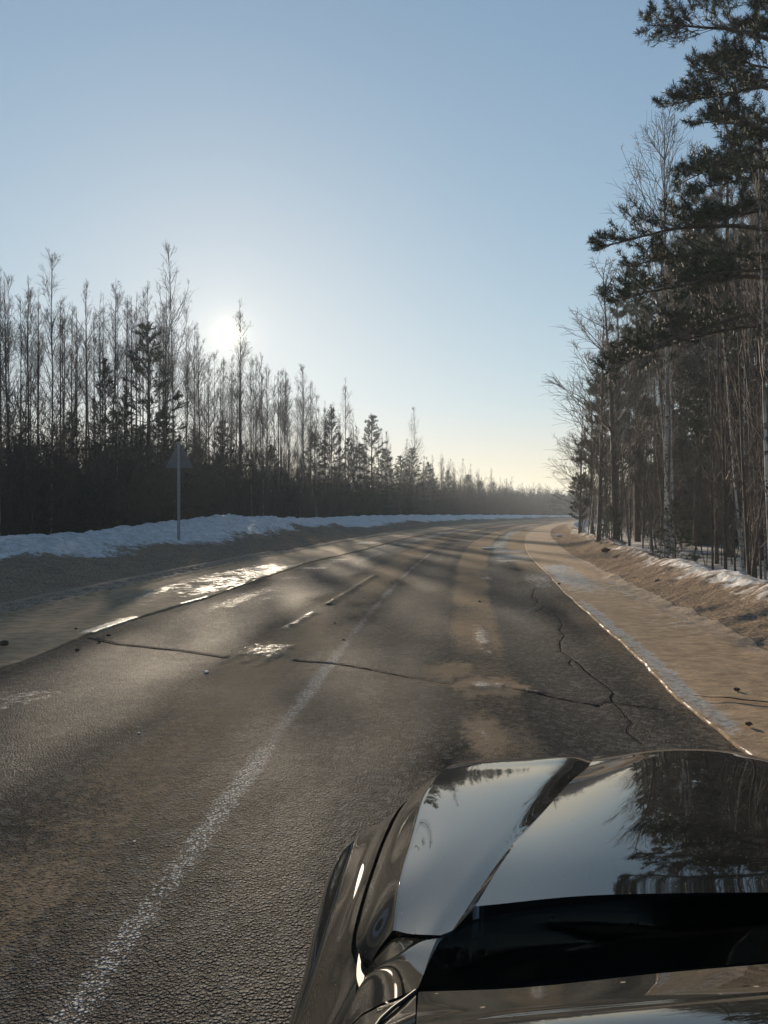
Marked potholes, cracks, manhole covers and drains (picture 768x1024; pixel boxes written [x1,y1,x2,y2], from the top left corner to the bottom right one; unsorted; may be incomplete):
crack [91,588,663,743]
